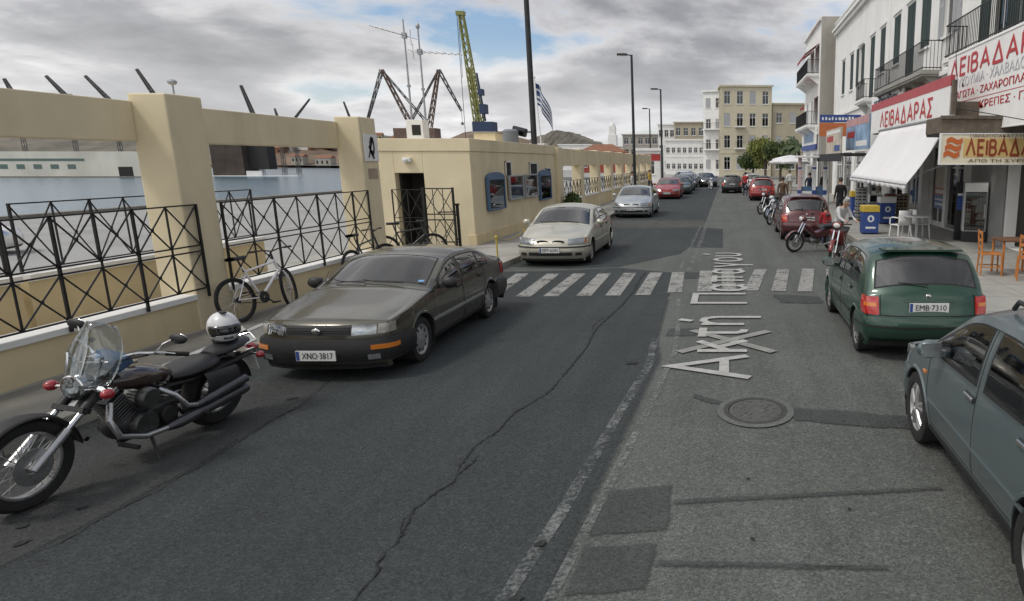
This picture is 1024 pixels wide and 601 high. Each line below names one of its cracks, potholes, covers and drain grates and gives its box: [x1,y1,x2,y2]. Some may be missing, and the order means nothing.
manhole cover [717,395,794,427]
crack [352,272,646,601]
